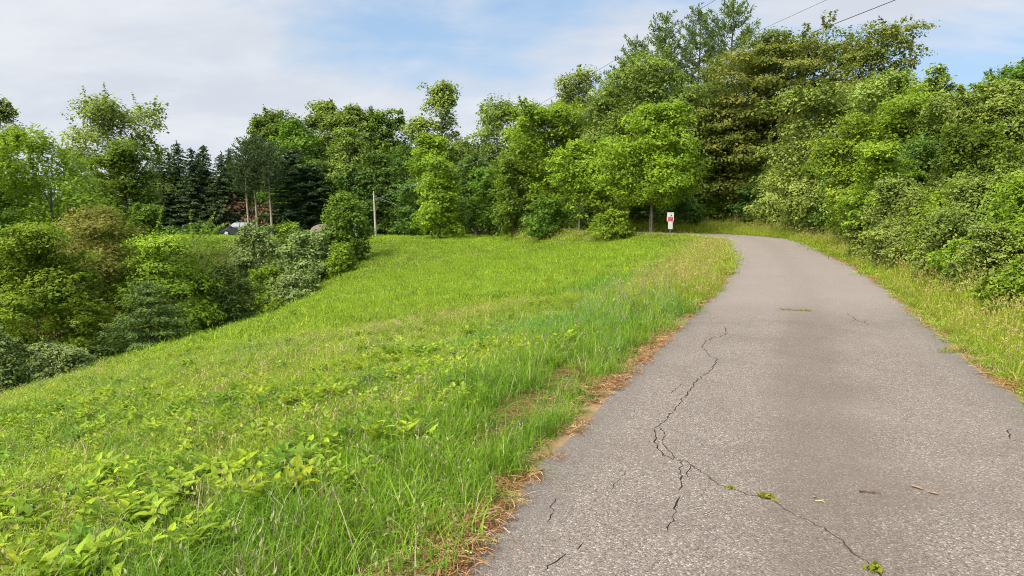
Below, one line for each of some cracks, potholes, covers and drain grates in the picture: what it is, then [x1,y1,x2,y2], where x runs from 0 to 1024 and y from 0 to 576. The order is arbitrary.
crack [631,327,882,576]
